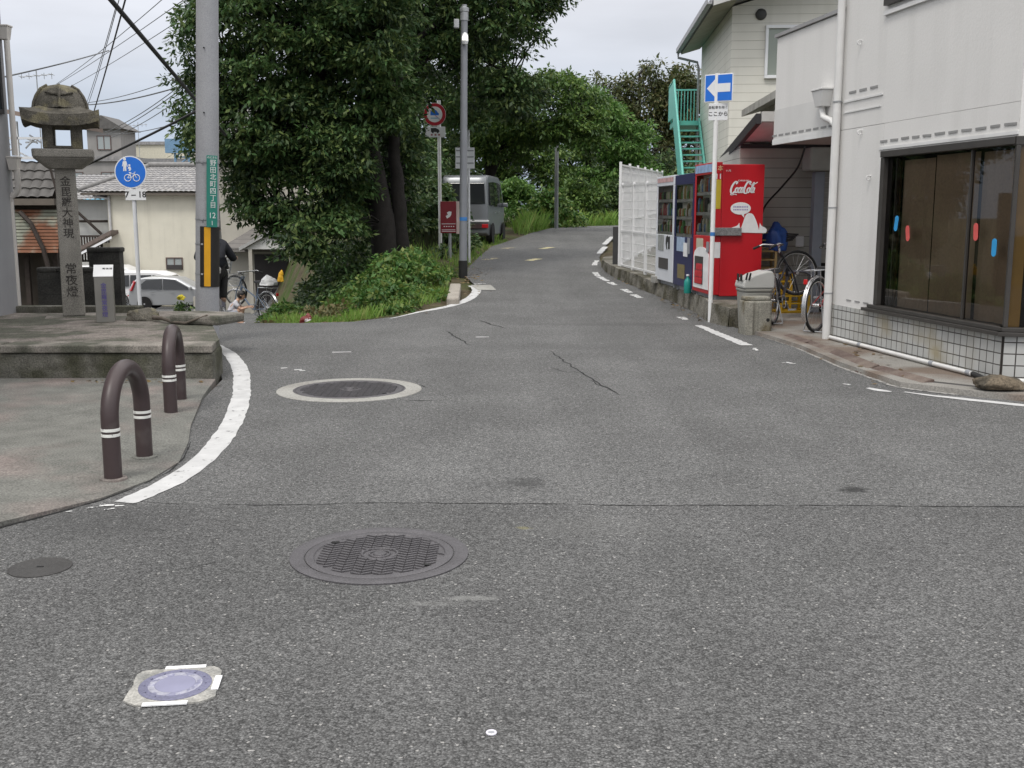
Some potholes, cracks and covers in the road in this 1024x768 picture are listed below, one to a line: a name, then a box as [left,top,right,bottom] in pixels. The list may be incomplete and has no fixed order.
manhole cover [276,378,422,402]
crack [551,352,619,395]
manhole cover [289,527,468,585]
utility cover [7,557,73,578]
